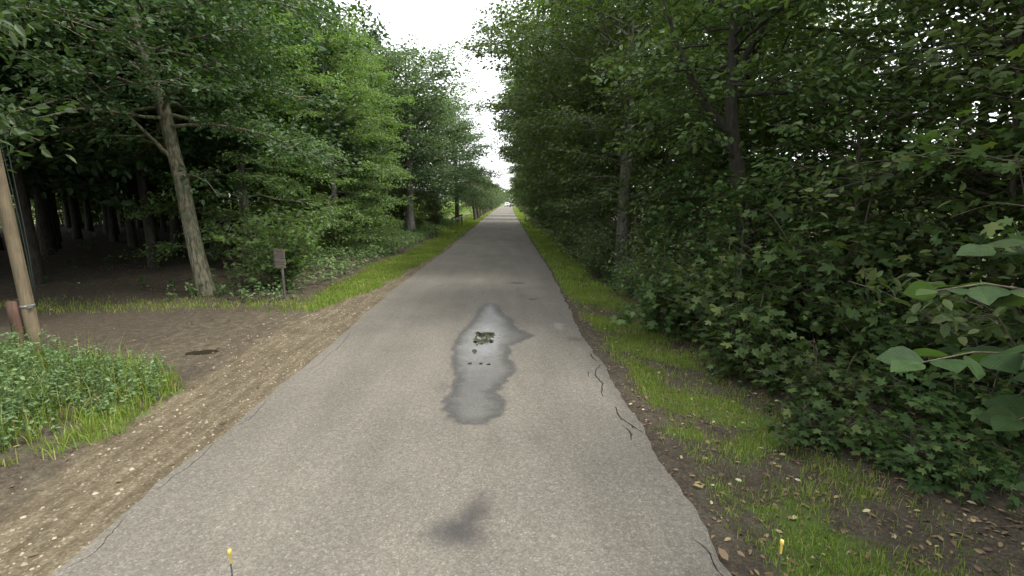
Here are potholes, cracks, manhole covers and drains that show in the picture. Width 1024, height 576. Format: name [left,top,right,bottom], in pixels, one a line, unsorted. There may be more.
pothole [473,331,496,345]
crack [588,353,643,440]
crack [65,517,126,569]
